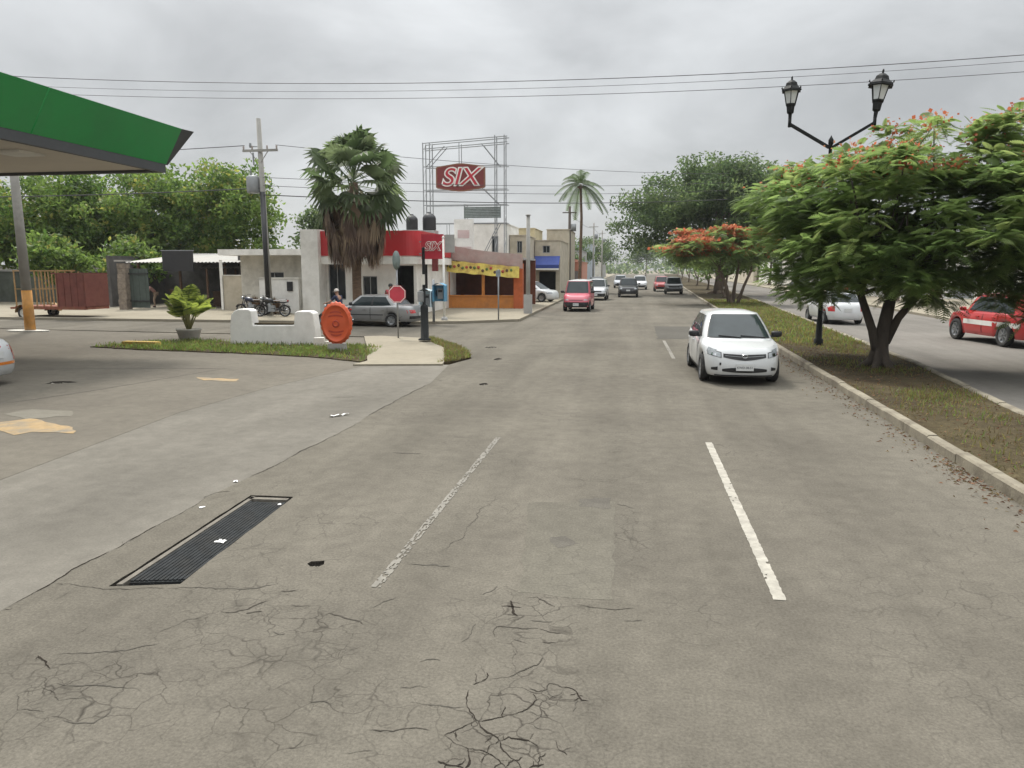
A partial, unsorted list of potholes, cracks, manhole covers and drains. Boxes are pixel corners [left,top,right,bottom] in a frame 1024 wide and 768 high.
drain grate [110,495,293,586]
crack [401,585,588,768]
crack [58,583,299,613]
crack [5,617,225,724]
